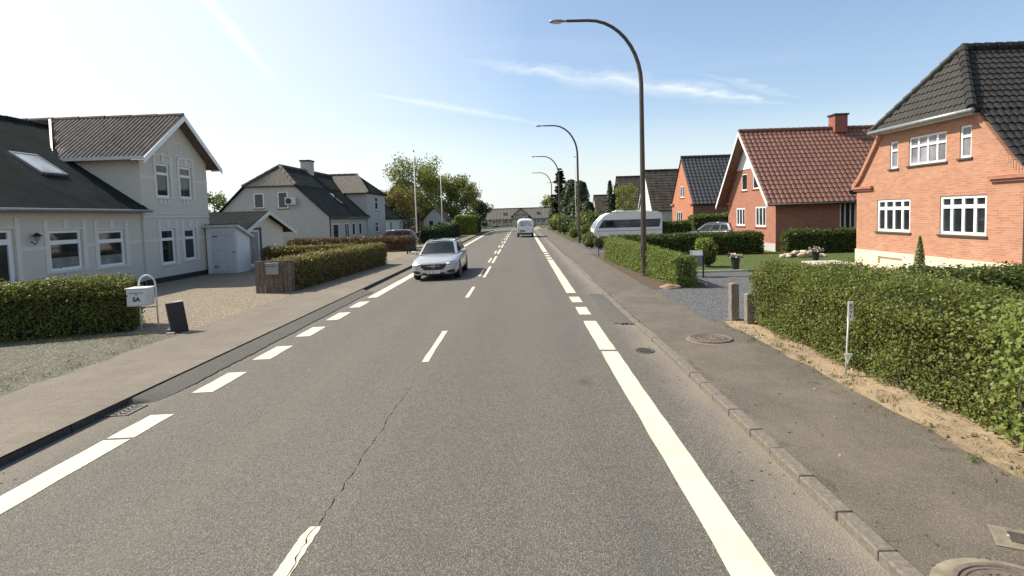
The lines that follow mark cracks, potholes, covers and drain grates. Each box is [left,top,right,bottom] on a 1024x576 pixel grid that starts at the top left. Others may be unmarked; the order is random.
manhole cover [686,333,735,345]
drain grate [104,404,148,417]
crack [289,379,415,574]
manhole cover [929,558,1024,576]
utility cover [988,524,1024,551]
